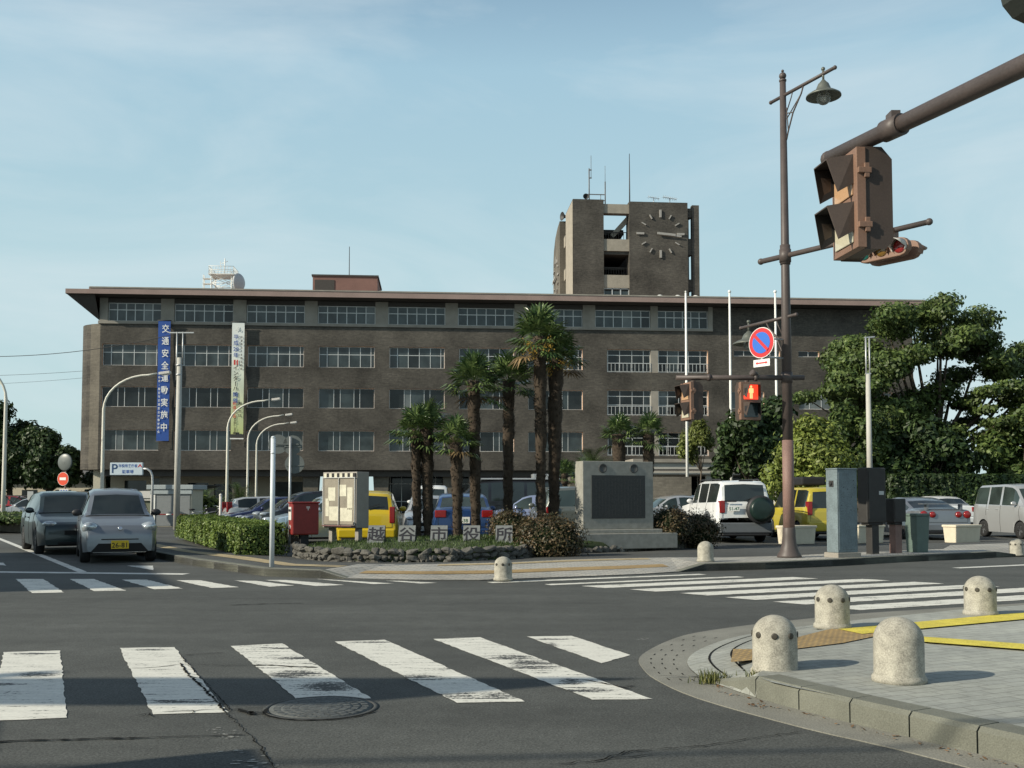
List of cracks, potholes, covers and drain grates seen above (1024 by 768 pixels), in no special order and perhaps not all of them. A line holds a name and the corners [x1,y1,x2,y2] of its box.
manhole cover [263,696,378,721]
